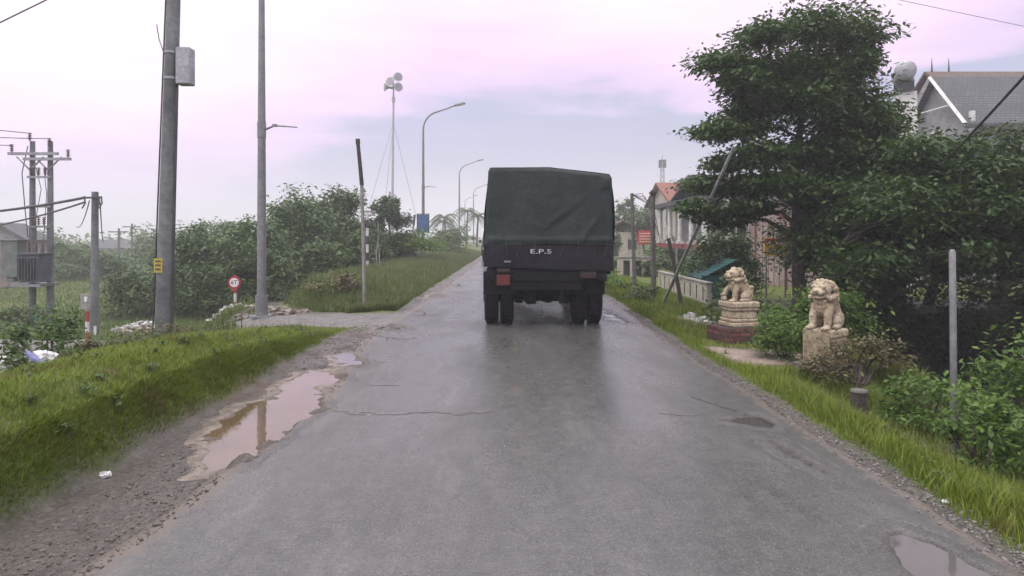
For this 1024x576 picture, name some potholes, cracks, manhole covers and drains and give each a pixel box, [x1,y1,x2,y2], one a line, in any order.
pothole [176,368,363,481]
pothole [702,411,794,432]
pothole [324,352,386,370]
crack [662,396,788,431]
pothole [858,518,1022,576]
